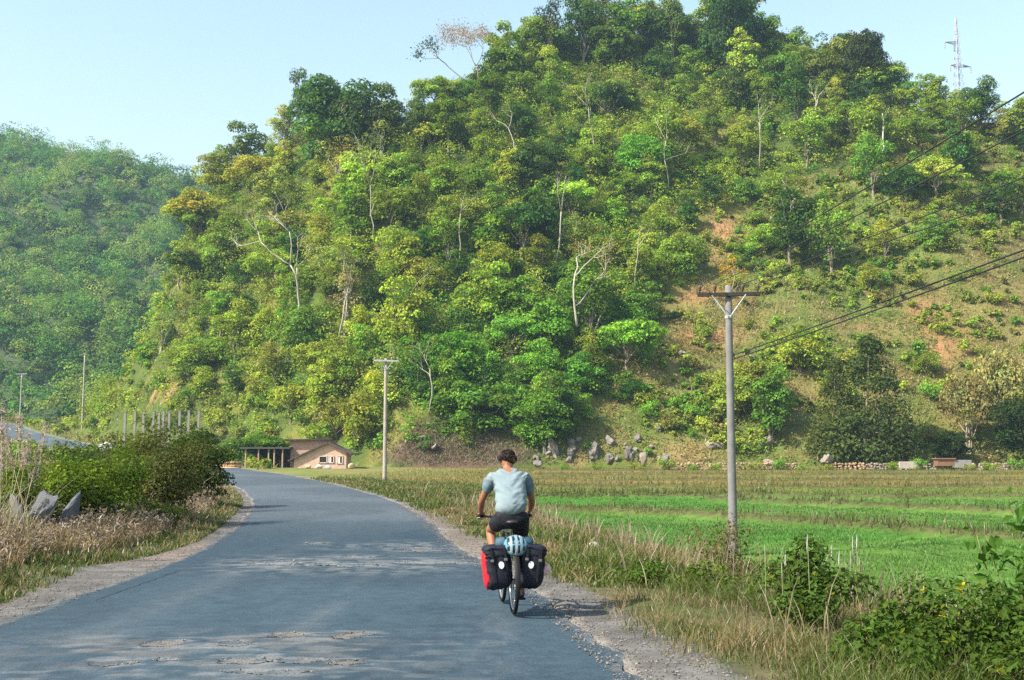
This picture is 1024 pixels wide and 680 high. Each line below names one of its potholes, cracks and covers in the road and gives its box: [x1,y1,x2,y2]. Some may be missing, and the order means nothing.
pothole [266,631,304,639]
pothole [216,656,278,664]
pothole [139,639,186,647]
pothole [329,630,375,639]
